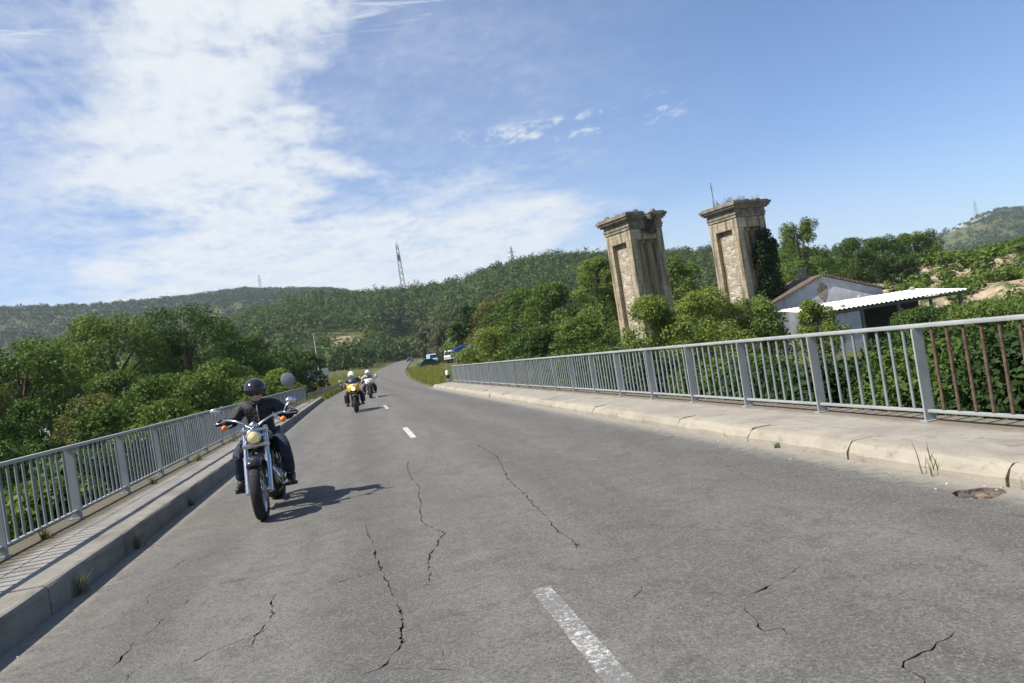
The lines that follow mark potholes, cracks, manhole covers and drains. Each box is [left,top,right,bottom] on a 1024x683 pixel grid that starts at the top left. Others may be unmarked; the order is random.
pothole [951,487,1007,499]
crack [407,462,445,586]
crack [901,629,956,683]
crack [191,595,276,662]
crack [330,527,463,682]
crack [478,445,580,549]
crack [740,566,800,635]
